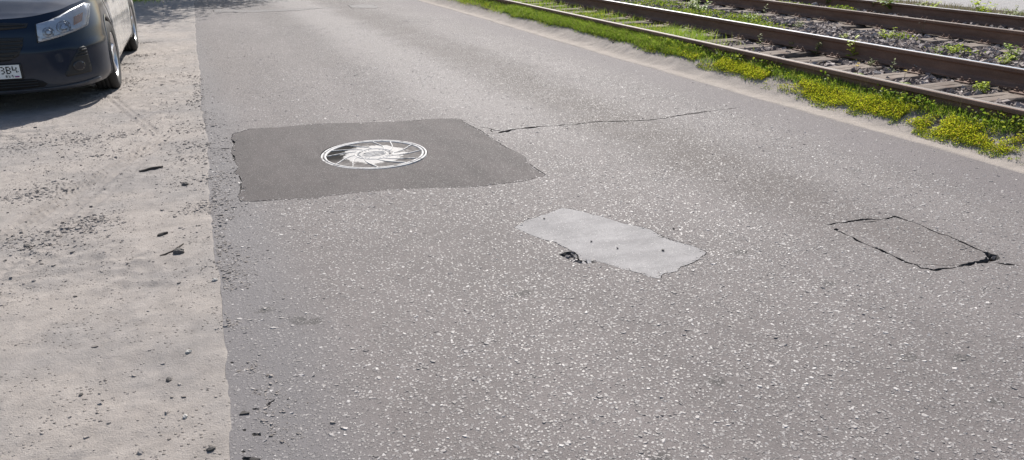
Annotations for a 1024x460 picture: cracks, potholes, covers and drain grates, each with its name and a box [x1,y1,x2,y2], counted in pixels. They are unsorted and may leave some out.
crack [481,108,733,134]
pothole [559,251,596,264]
manhole cover [320,140,427,169]
